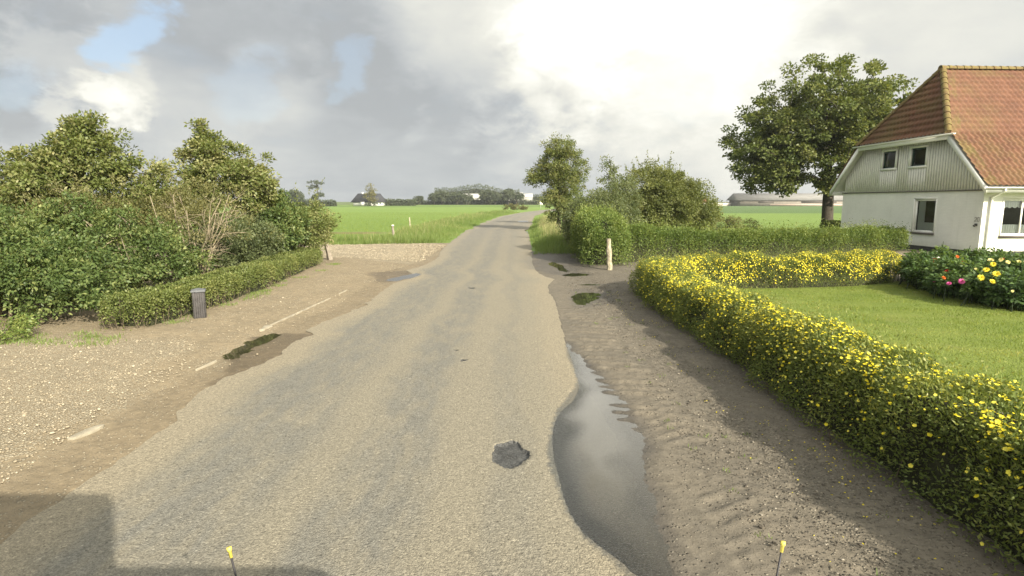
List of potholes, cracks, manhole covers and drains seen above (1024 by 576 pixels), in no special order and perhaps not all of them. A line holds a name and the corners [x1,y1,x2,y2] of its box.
pothole [484,437,539,473]
